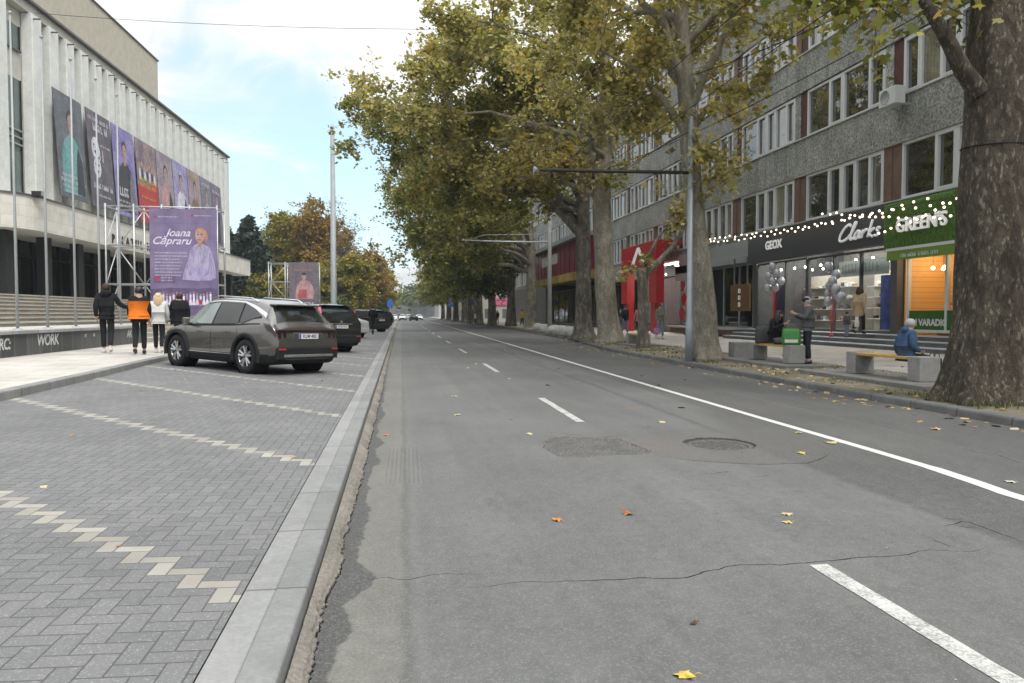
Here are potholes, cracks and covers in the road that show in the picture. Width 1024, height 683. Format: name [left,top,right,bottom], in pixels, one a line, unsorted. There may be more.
crack [675,456,826,474]
manhole cover [682,438,757,451]
crack [470,518,1018,588]
